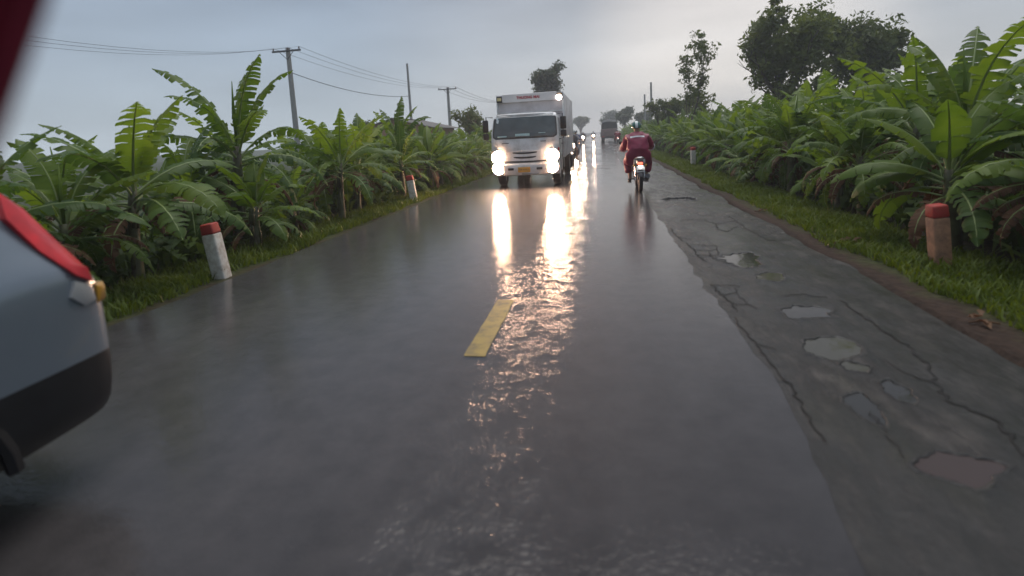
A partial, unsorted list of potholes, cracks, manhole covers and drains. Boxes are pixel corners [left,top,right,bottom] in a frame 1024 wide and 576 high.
crack [671,216,779,263]
pothole [713,251,767,269]
pothole [878,377,921,406]
crack [780,293,1024,457]
crack [710,284,758,310]
pothole [839,390,890,429]
